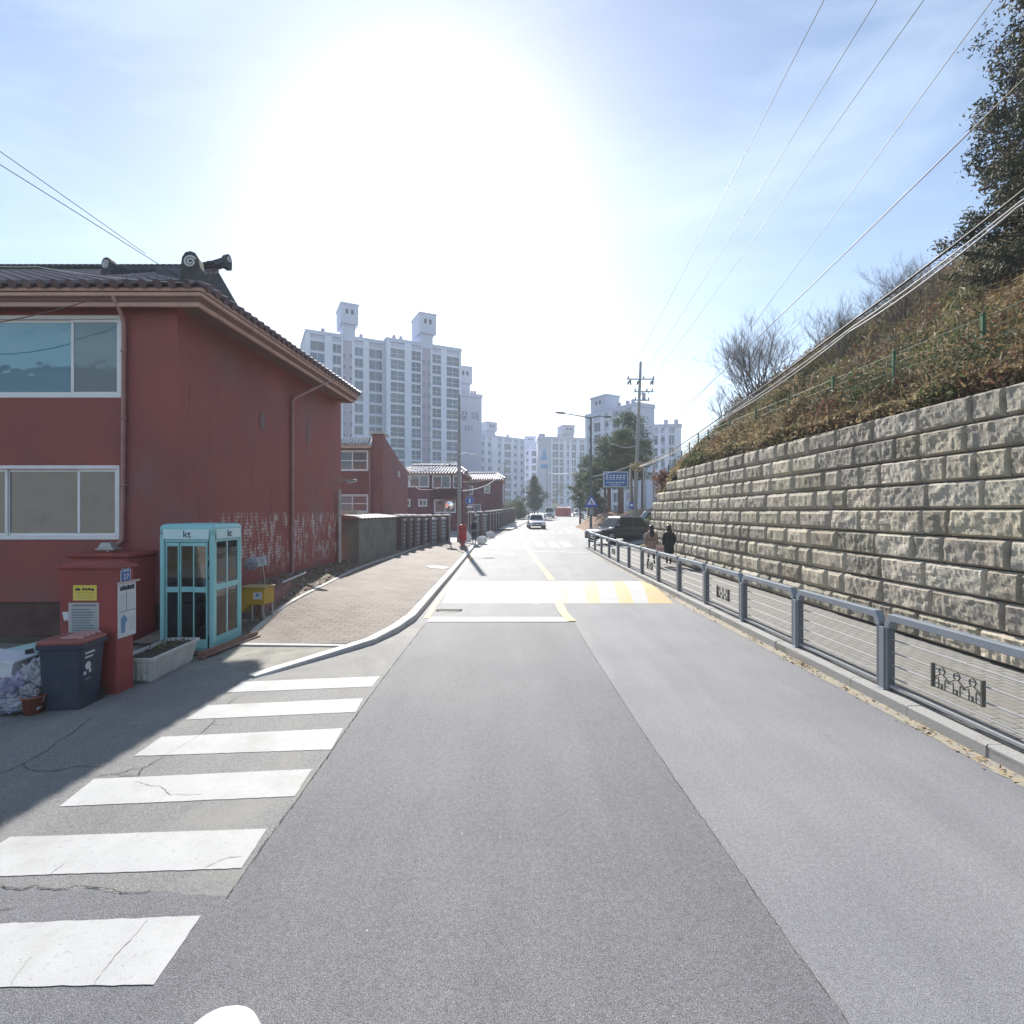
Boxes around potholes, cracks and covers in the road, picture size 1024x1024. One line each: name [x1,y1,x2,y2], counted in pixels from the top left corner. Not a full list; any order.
crack [0,863,150,893]
crack [3,699,234,795]
